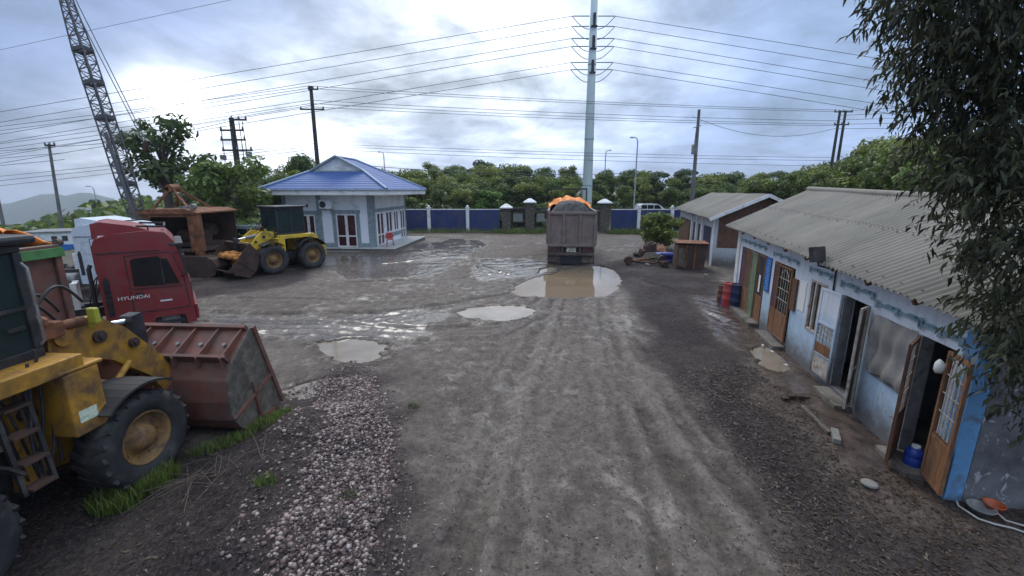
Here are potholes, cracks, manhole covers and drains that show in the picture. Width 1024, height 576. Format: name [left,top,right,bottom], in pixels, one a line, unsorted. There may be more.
pothole [504,265,630,301]
pothole [738,341,803,376]
pothole [449,303,544,324]
pothole [307,334,403,367]
